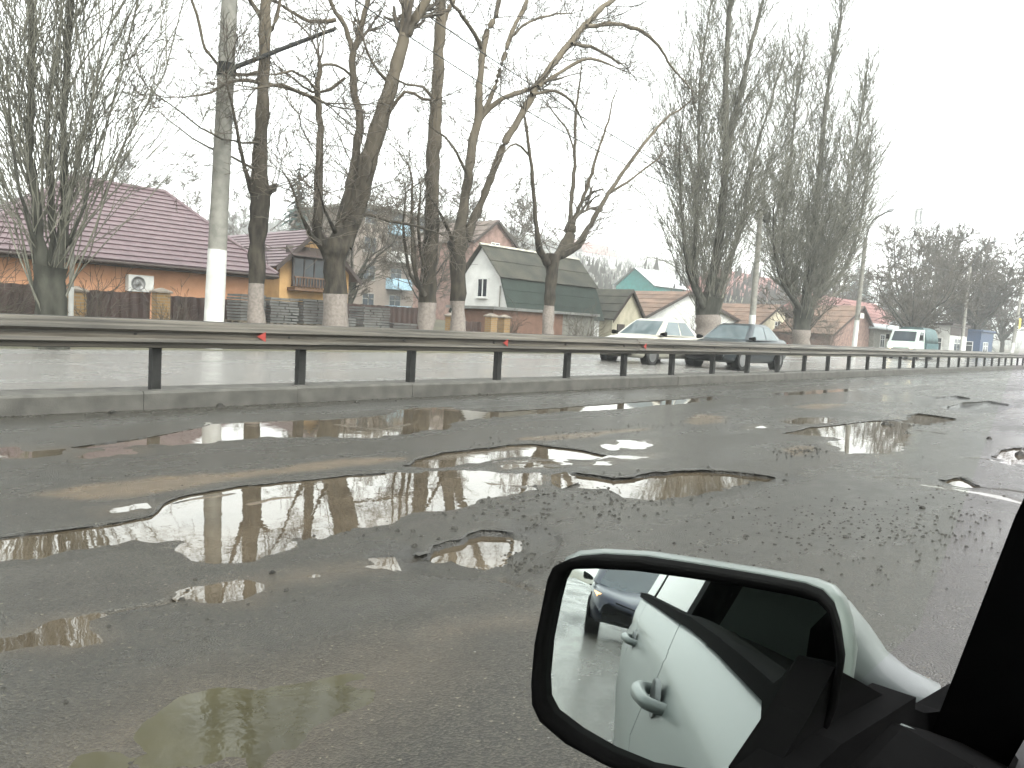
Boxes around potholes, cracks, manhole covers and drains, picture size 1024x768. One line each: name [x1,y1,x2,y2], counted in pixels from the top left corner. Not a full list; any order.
pothole [396,442,610,469]
pothole [933,474,990,489]
pothole [562,466,789,503]
pothole [776,419,920,455]
pothole [944,400,1011,414]
pothole [396,524,537,577]
pothole [902,412,961,426]
pothole [59,395,725,449]
pothole [983,446,1024,466]
pothole [0,467,579,568]
